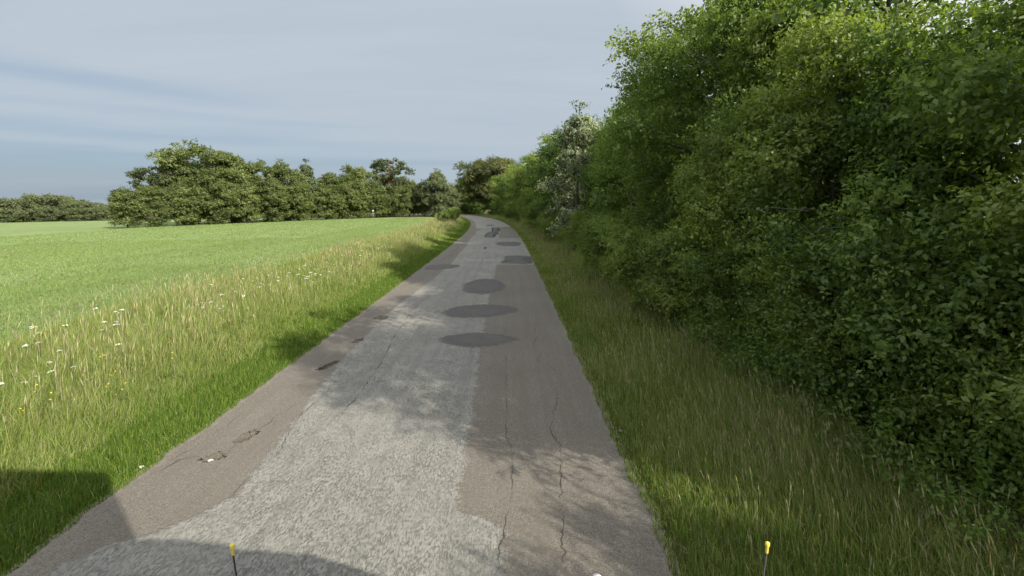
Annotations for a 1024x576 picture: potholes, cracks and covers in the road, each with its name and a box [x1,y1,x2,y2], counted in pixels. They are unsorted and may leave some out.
pothole [198,452,227,463]
crack [157,279,435,493]
crack [496,327,514,573]
pothole [232,429,261,443]
crack [550,391,566,561]
